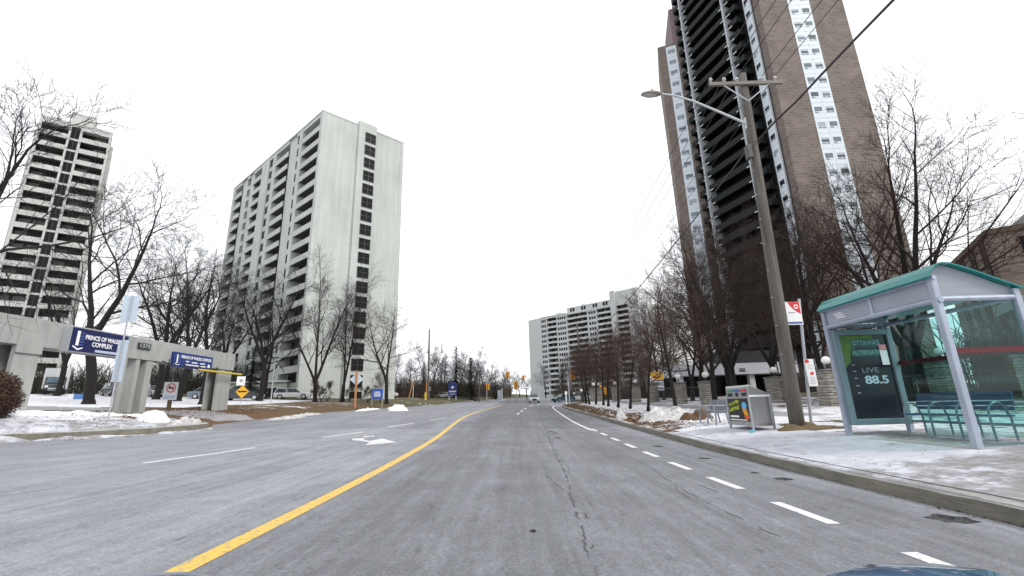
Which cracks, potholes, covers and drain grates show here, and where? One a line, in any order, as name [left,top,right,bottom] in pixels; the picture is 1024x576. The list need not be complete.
crack [646,465,781,537]
crack [514,421,597,572]
